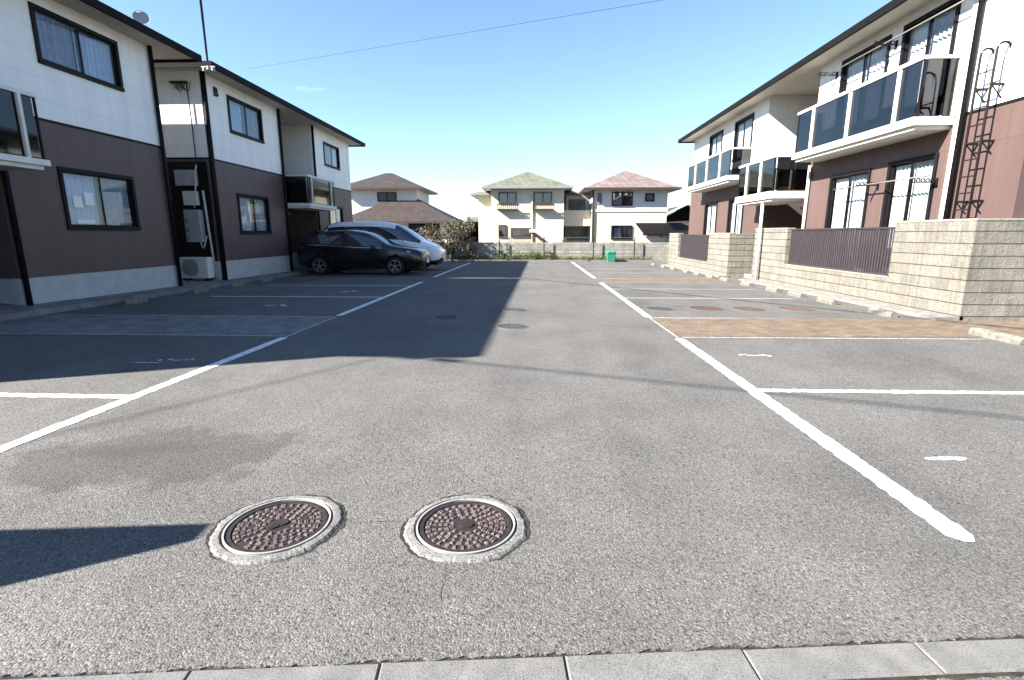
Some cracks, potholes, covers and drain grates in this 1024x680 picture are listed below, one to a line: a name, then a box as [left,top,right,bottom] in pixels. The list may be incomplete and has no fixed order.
manhole cover [205,494,346,565]
manhole cover [399,493,531,565]
